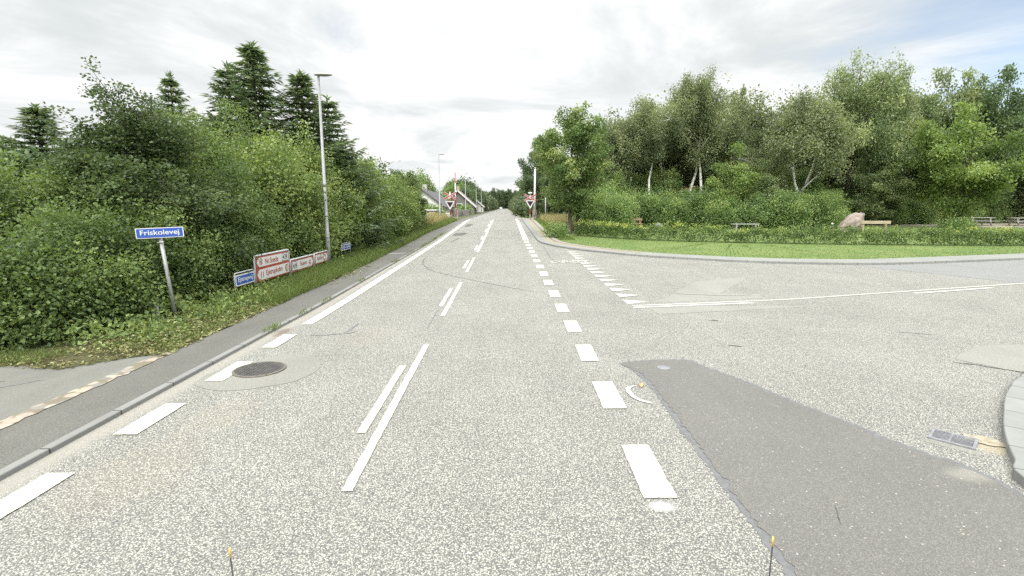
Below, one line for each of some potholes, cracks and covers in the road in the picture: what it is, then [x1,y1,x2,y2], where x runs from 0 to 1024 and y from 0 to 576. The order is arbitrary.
manhole cover [231,361,287,378]
drain grate [919,428,982,456]
